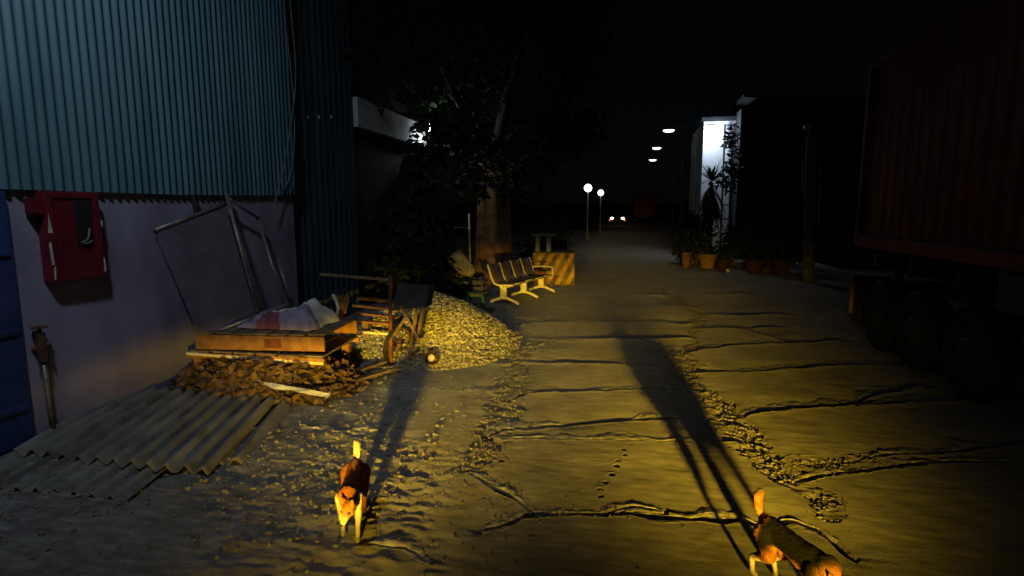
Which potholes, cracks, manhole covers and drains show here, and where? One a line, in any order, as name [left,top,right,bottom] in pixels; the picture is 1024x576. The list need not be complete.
crack [411,292,1024,488]
crack [460,469,860,564]
